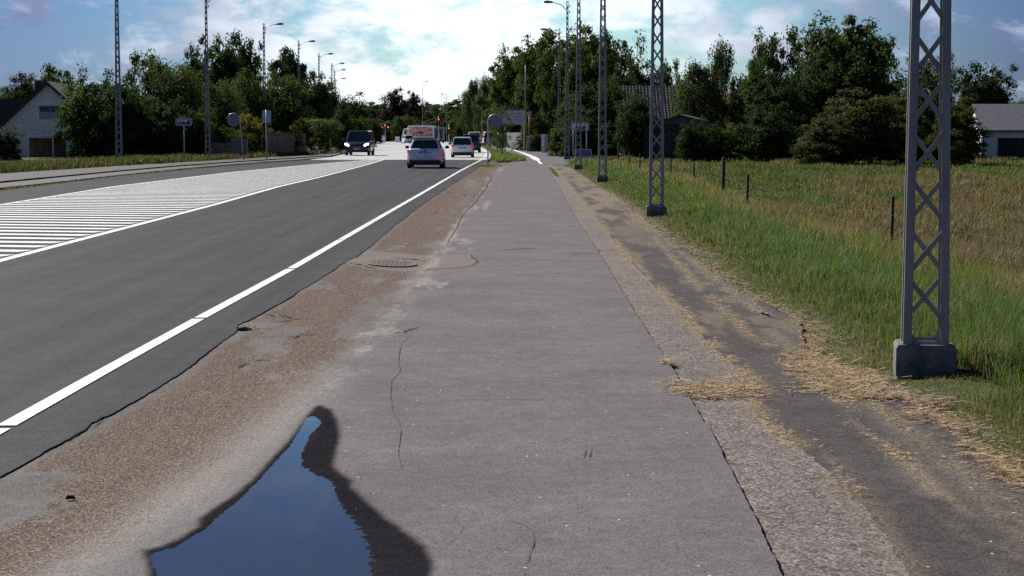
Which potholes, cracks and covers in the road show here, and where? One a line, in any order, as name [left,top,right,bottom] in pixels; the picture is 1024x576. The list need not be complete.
crack [390,327,419,476]
